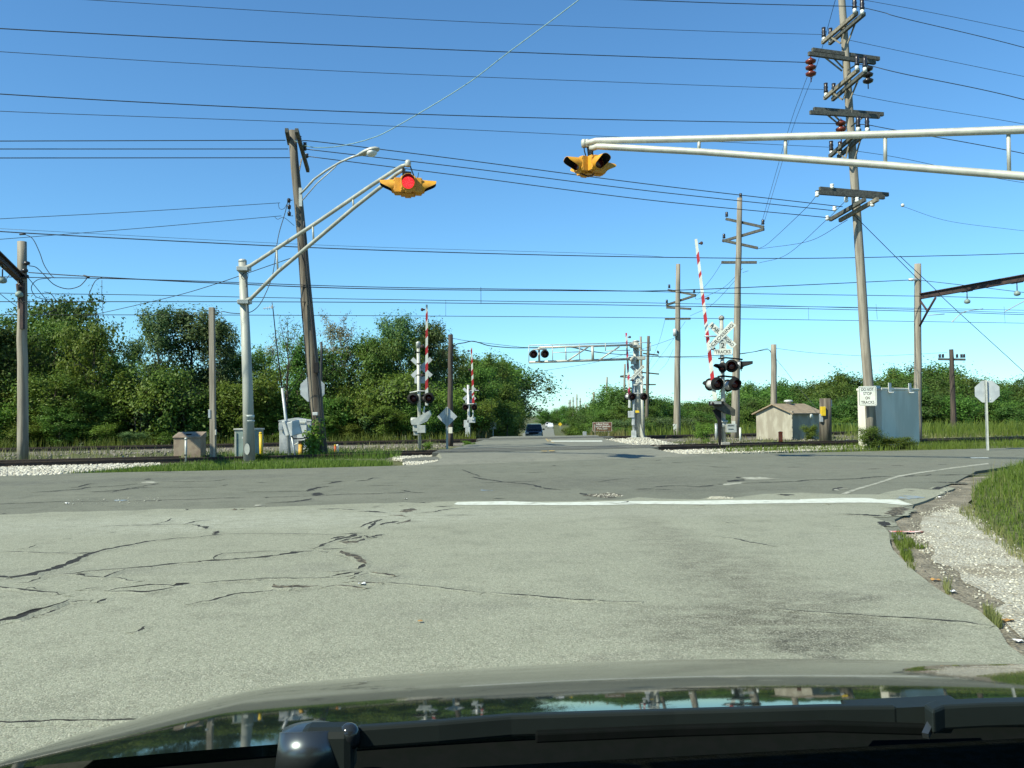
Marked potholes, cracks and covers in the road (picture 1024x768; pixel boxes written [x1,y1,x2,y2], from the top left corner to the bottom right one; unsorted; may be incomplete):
crack [0,715,145,728]
crack [0,471,643,625]
crack [128,626,155,634]
